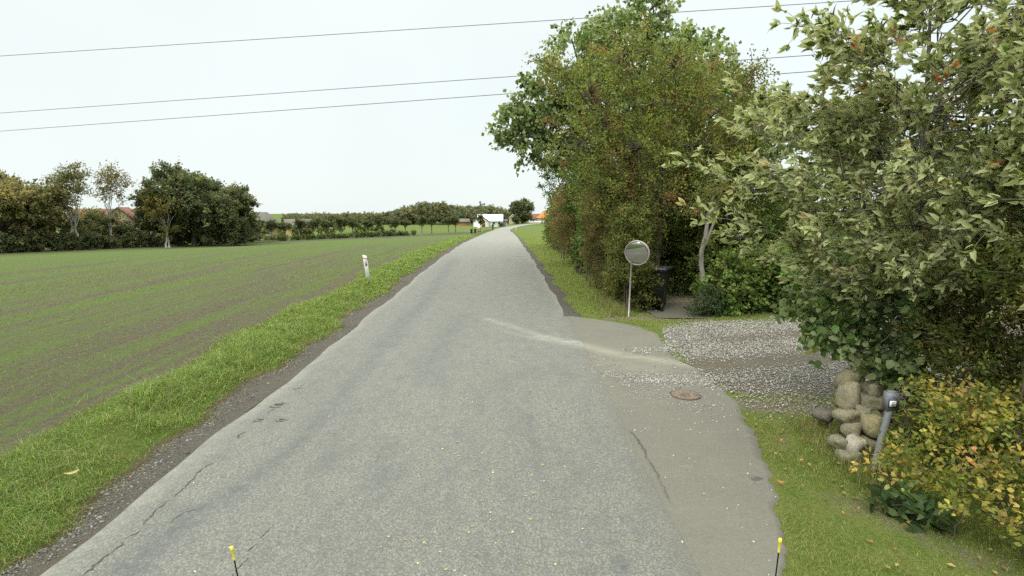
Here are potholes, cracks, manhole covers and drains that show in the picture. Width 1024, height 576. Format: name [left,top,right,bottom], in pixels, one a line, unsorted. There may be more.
crack [82,463,212,576]
manhole cover [669,389,702,400]
